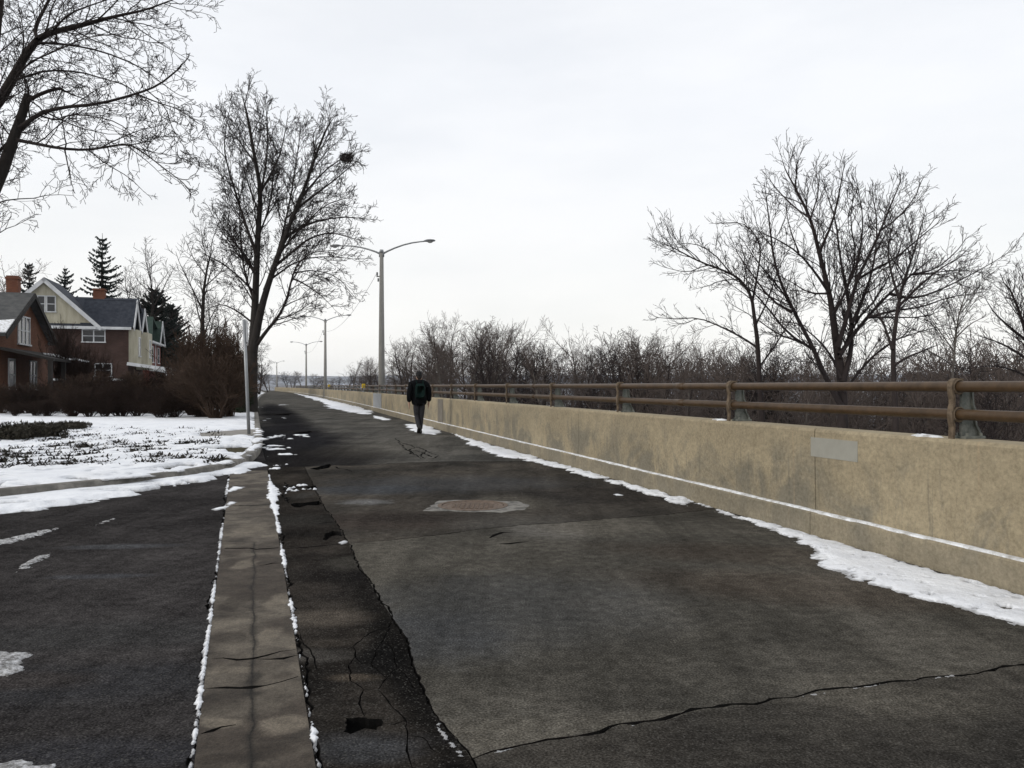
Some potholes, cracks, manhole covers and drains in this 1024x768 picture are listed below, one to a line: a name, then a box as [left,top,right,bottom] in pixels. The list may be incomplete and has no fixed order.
manhole cover [423,500,529,513]
pothole [344,717,383,734]
crack [259,468,1024,768]
crack [335,438,505,472]
